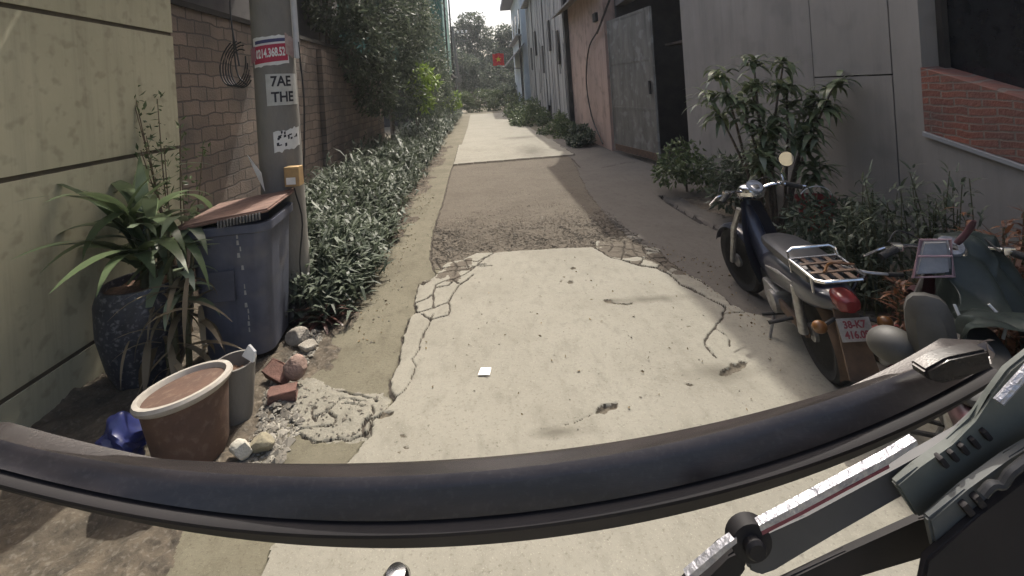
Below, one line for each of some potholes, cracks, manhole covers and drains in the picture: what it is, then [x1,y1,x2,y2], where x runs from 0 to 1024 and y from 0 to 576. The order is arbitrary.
crack [288,205,745,462]
pothole [595,403,618,414]
pothole [719,361,747,377]
